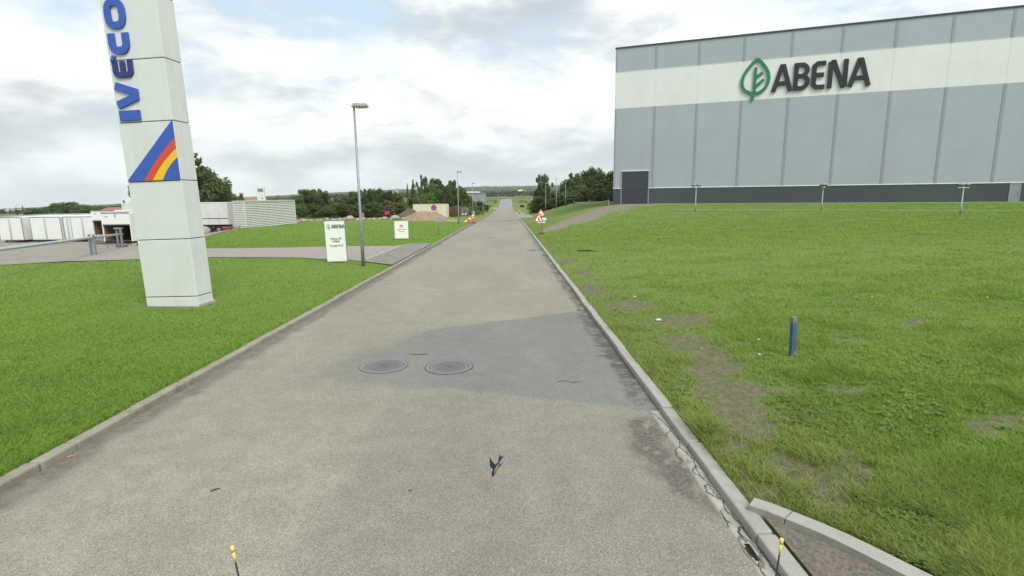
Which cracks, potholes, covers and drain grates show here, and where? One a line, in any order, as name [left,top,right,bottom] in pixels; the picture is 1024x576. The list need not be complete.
pothole [737,535,765,568]
manhole cover [359,359,408,374]
crack [650,412,780,576]
manhole cover [425,359,474,375]
